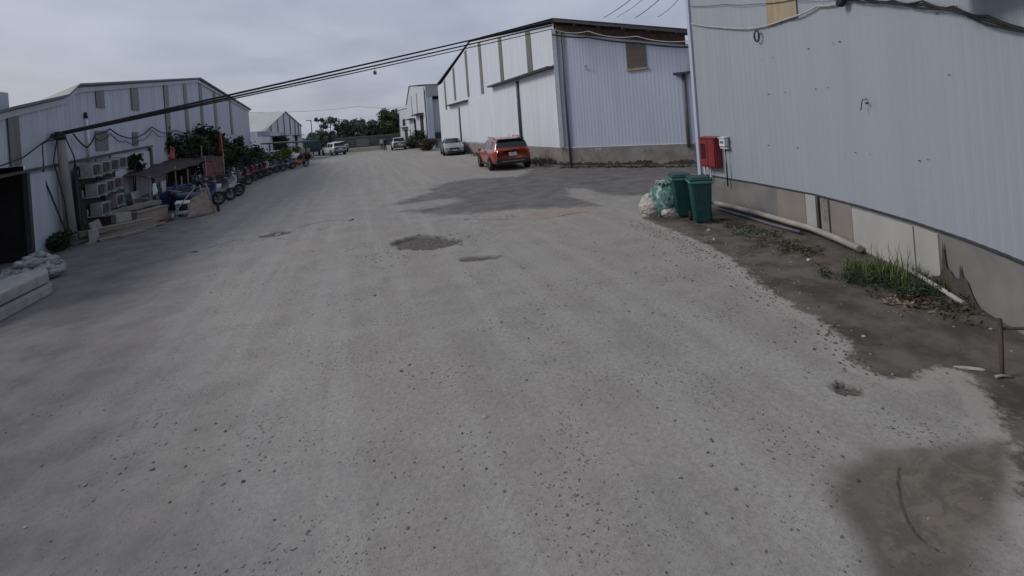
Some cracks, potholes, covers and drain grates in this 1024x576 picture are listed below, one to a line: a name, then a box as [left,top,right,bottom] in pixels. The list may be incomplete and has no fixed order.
pothole [244,228,308,242]
pothole [372,229,488,257]
